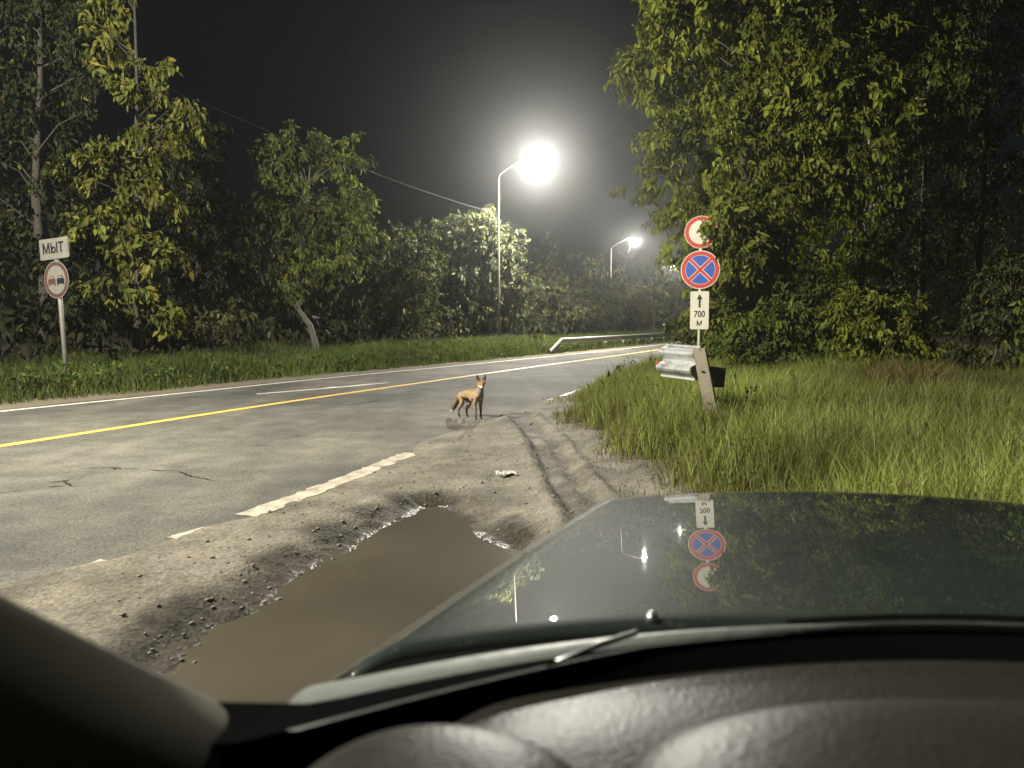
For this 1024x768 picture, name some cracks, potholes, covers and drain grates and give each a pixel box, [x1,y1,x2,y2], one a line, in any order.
crack [91,466,216,481]
